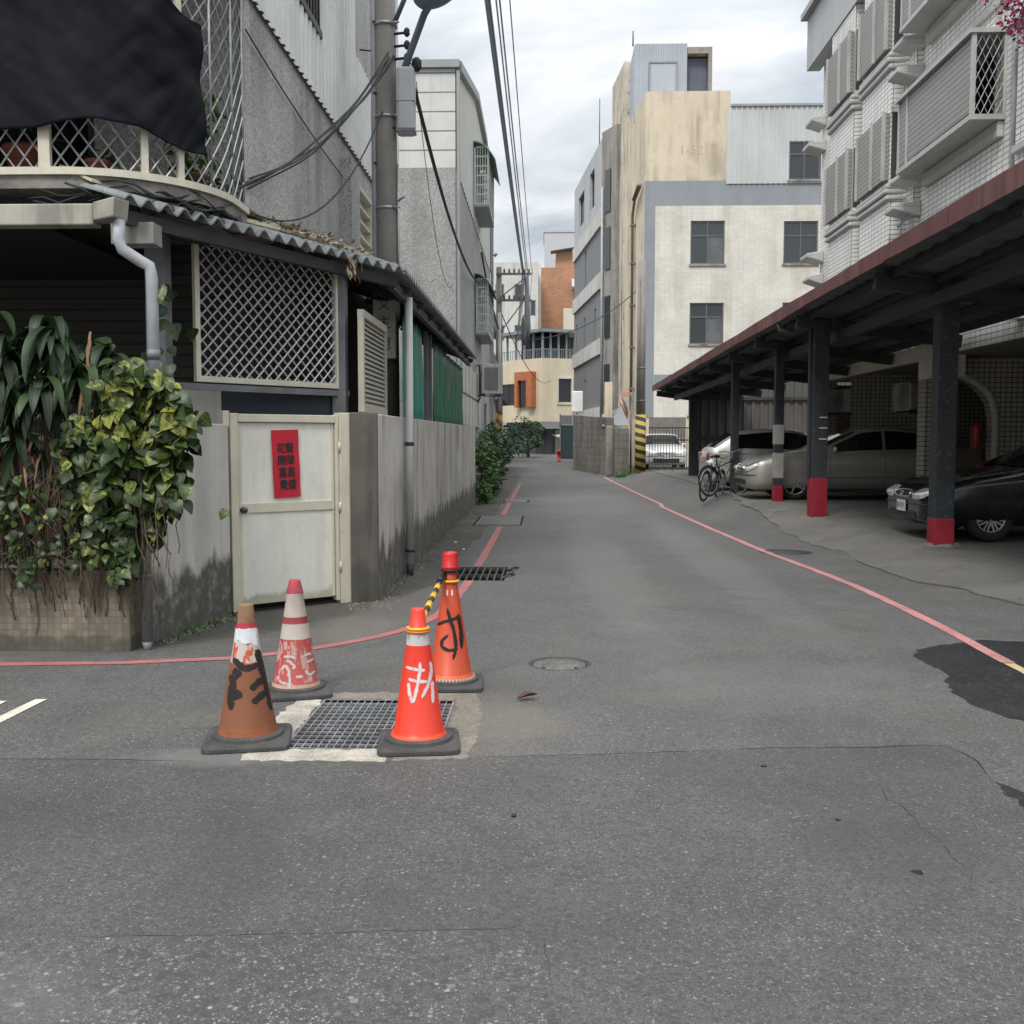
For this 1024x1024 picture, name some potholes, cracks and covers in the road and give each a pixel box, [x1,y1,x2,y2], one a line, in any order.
drain grate [289,699,455,749]
drain grate [456,566,519,581]
manhole cover [528,657,591,671]
crack [879,784,974,891]
